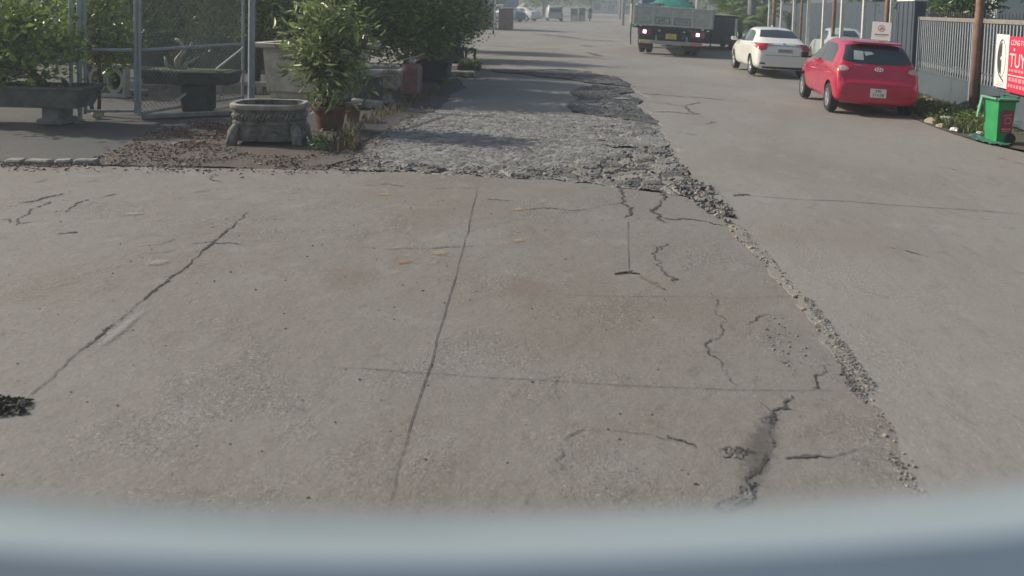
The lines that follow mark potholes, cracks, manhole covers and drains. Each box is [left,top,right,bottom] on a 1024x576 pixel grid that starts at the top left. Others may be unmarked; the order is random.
crack [651,243,679,283]
crack [3,179,116,234]
crack [524,188,720,225]
pothole [588,120,670,148]
crack [555,429,696,472]
crack [718,395,860,503]
crack [31,212,247,394]
